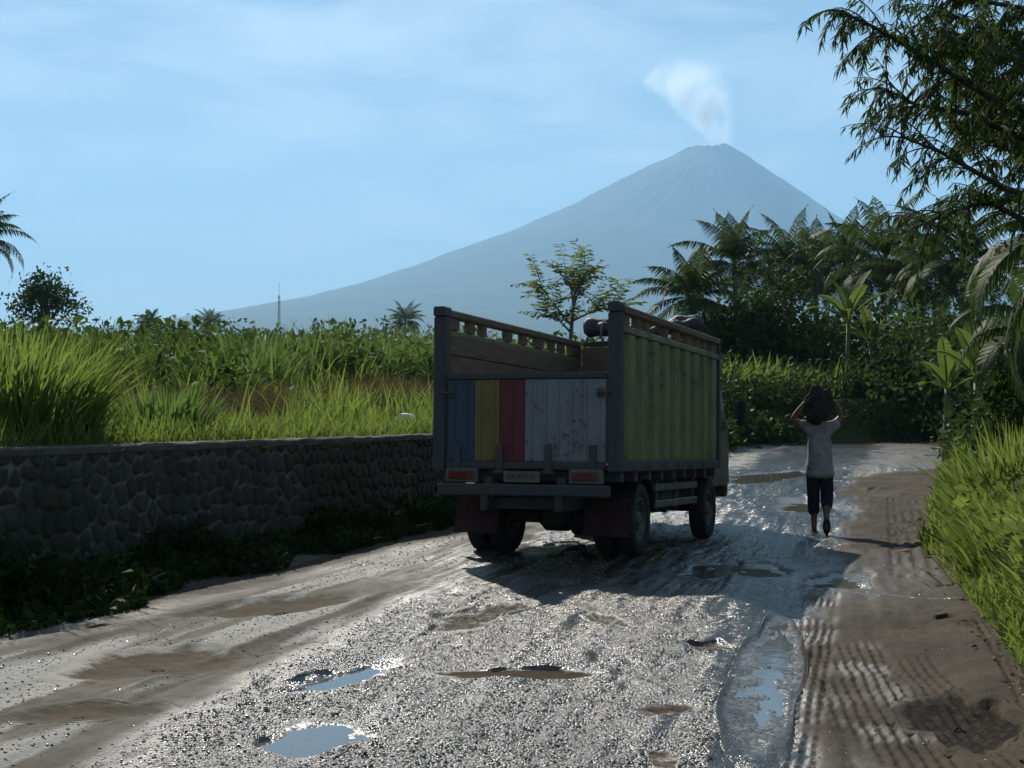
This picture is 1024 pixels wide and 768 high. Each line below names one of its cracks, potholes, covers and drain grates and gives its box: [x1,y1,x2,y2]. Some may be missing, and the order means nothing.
pothole [667,559,798,581]
pothole [622,700,710,718]
pothole [262,653,417,699]
pothole [419,664,614,681]
pothole [684,638,734,653]
pothole [247,719,388,762]
